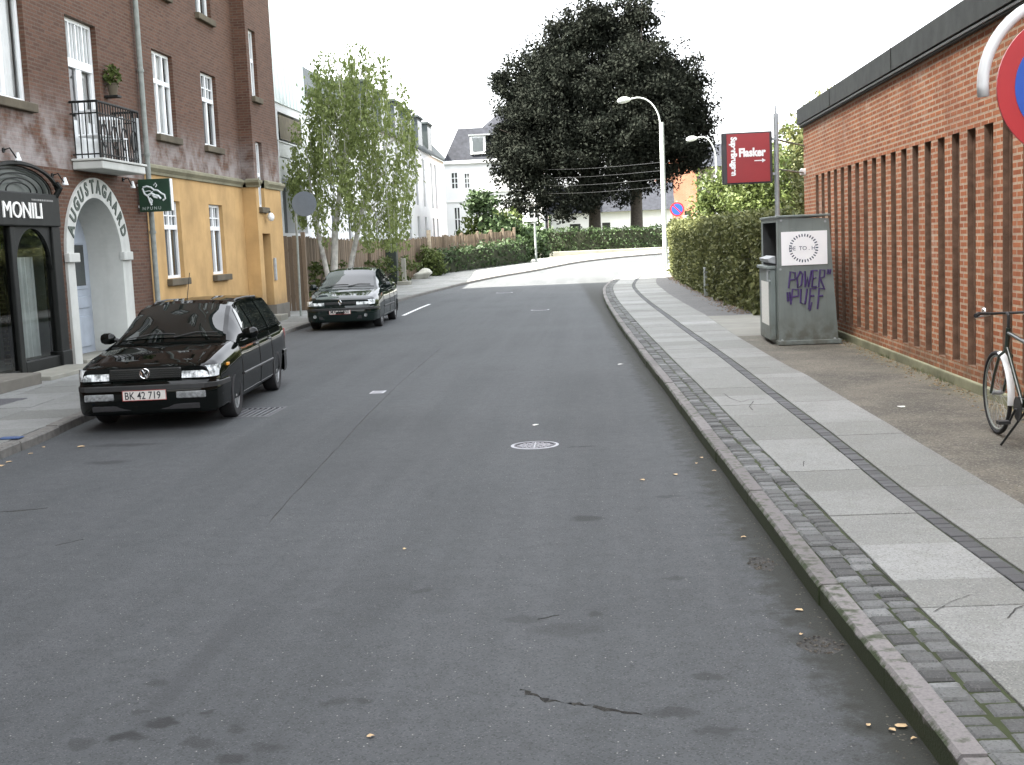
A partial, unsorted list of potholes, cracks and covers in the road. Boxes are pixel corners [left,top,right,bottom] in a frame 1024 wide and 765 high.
crack [520,689,642,715]
manhole cover [511,441,559,449]
pothole [796,635,846,655]
drain grate [223,406,288,418]
pothole [746,557,778,571]
